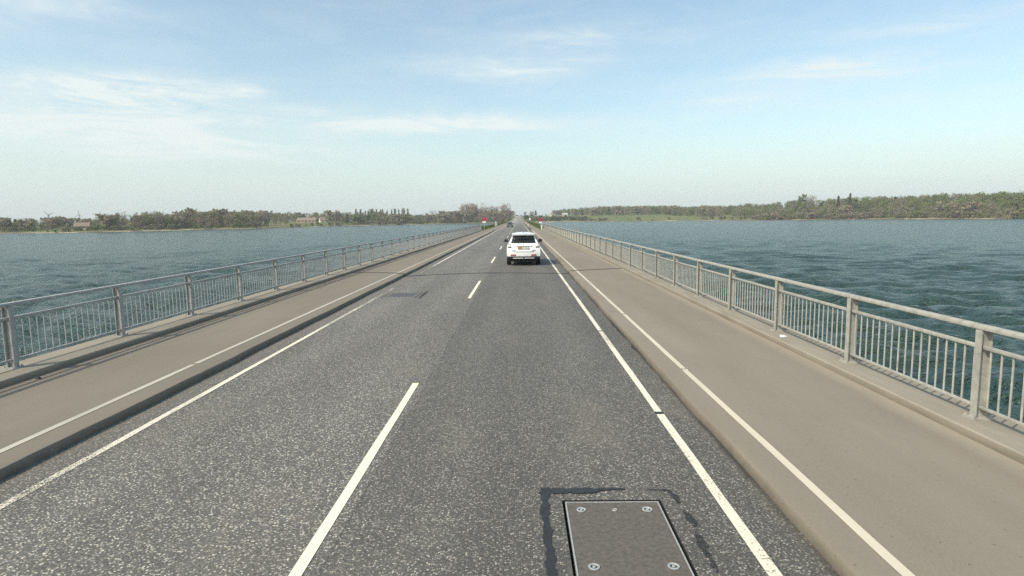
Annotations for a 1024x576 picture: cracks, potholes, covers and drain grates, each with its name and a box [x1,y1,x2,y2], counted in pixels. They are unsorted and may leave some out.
manhole cover [562,500,698,576]
